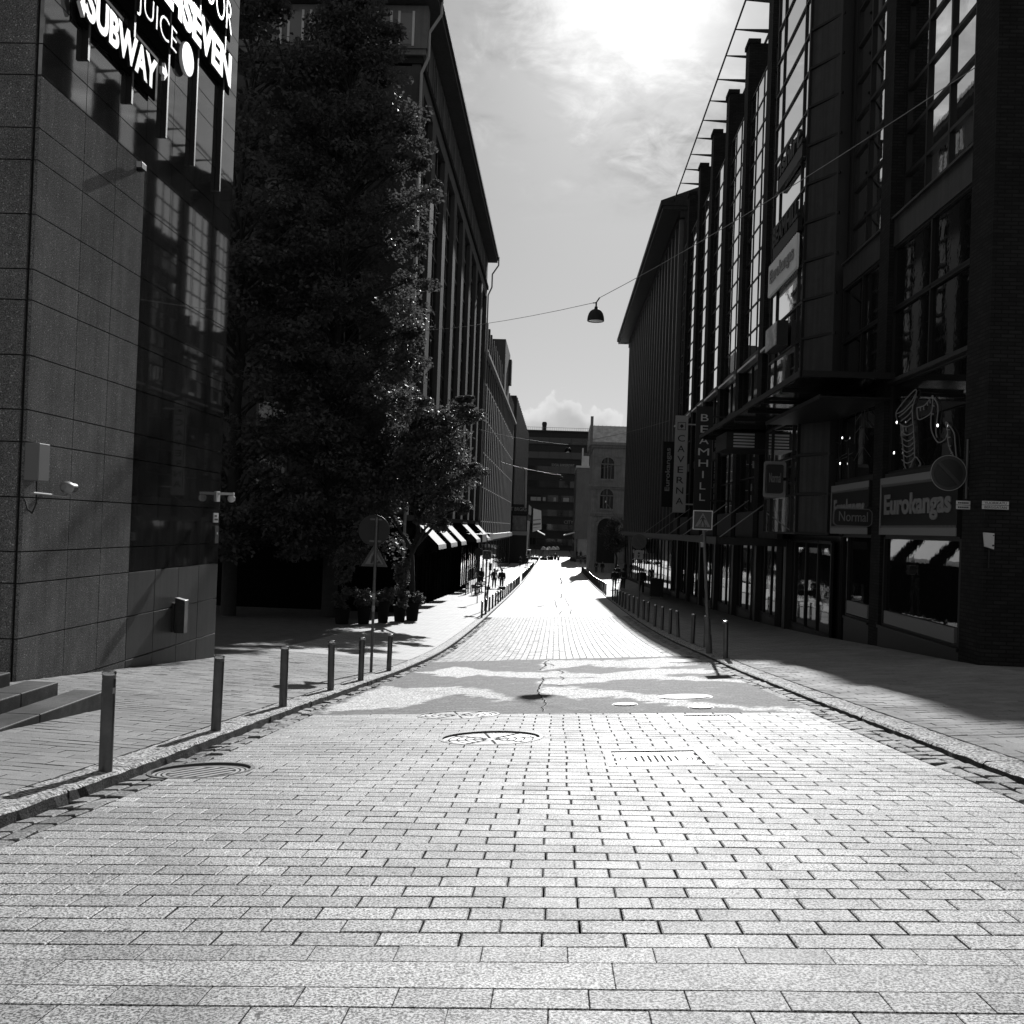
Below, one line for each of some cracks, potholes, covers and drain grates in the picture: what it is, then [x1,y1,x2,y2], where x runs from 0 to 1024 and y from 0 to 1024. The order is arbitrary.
manhole cover [417,711,500,721]
crack [536,659,565,711]
manhole cover [438,730,544,747]
manhole cover [146,762,255,782]
